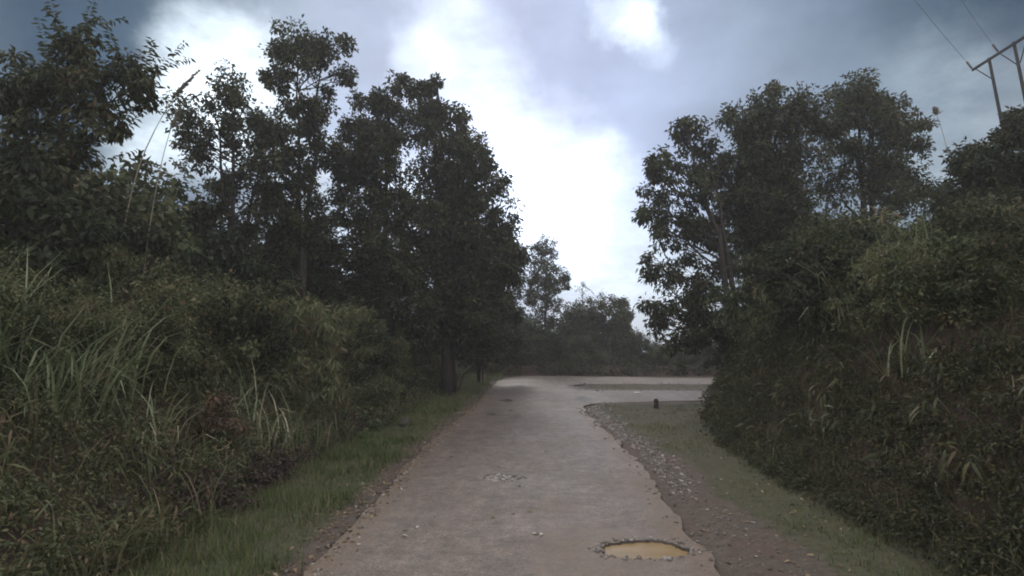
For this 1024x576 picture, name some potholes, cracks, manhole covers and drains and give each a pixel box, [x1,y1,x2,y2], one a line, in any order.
pothole [483,473,528,482]
pothole [587,536,707,561]
